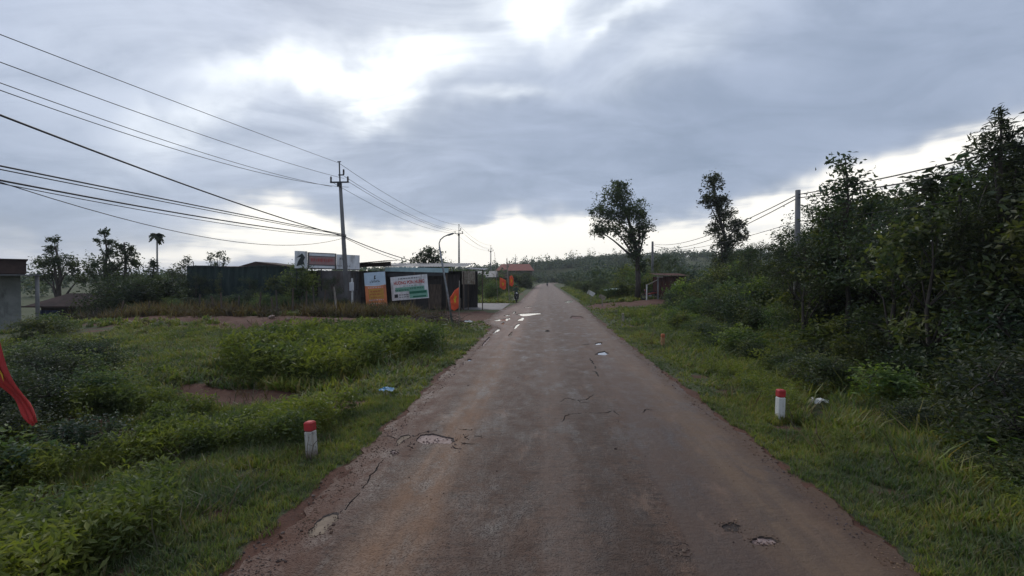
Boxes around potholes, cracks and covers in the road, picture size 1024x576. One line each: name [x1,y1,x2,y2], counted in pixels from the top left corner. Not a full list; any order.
pothole [722,522,740,532]
pothole [749,536,781,546]
pothole [416,433,455,445]
crack [345,459,384,510]
pothole [308,512,339,537]
